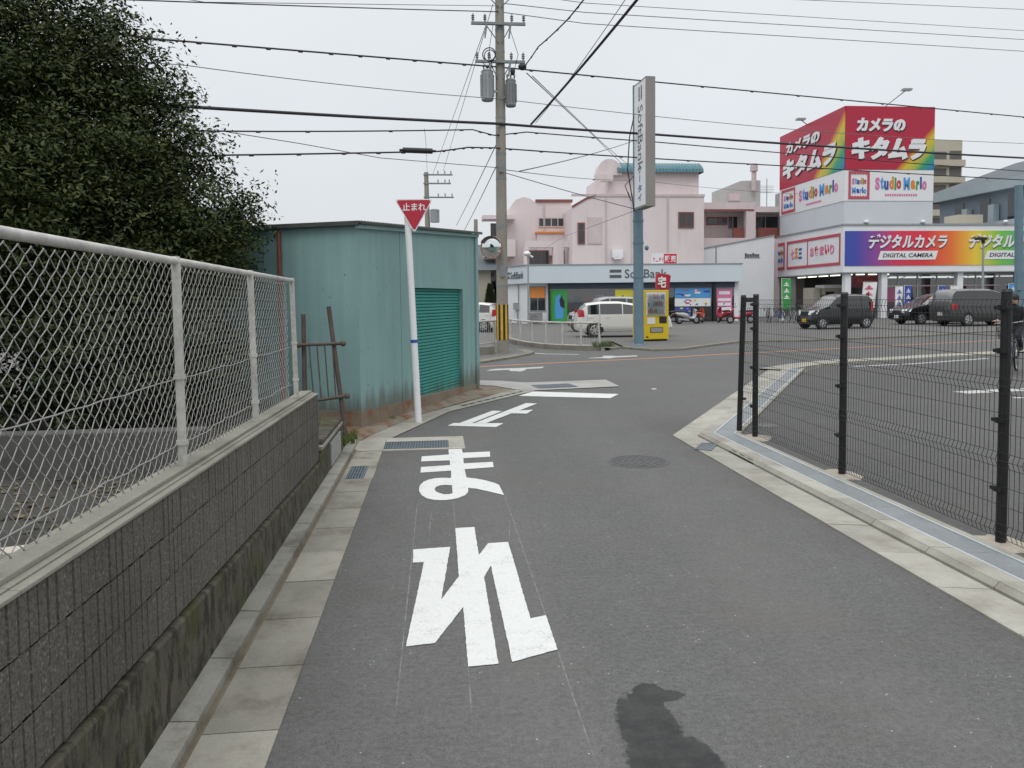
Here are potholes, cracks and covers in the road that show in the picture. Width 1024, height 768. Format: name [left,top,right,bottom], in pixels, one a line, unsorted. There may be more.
manhole cover [608,455,669,468]
drain grate [384,440,448,449]
drain grate [345,466,369,479]
drain grate [694,442,717,451]
